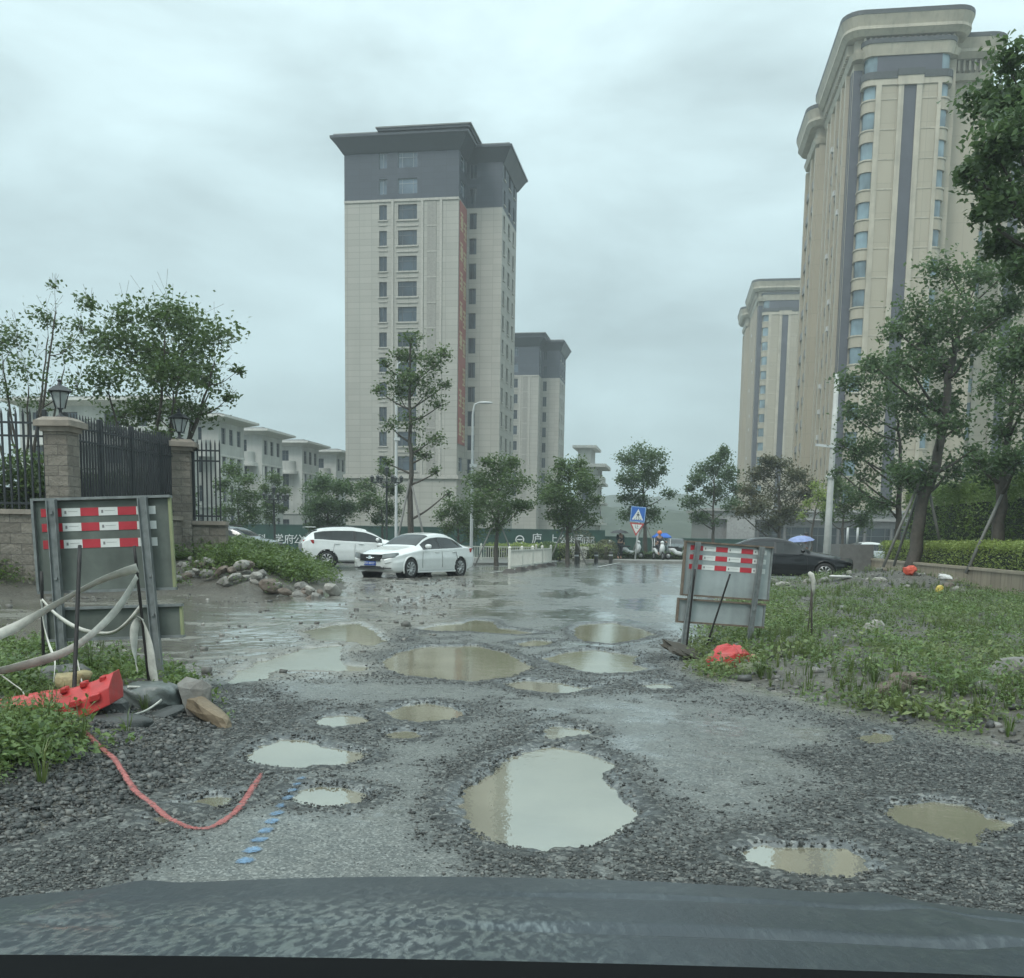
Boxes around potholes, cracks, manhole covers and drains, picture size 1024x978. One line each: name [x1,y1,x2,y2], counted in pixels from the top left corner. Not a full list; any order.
pothole [368,643,546,683]
pothole [363,697,484,725]
pothole [563,621,664,645]
pothole [294,708,391,730]
pothole [855,792,1024,852]
pothole [208,642,384,686]
pothole [261,777,392,812]
pothole [522,719,612,747]
pothole [706,829,910,887]
pothole [293,621,397,646]
pothole [222,732,388,772]
pothole [423,738,672,860]
